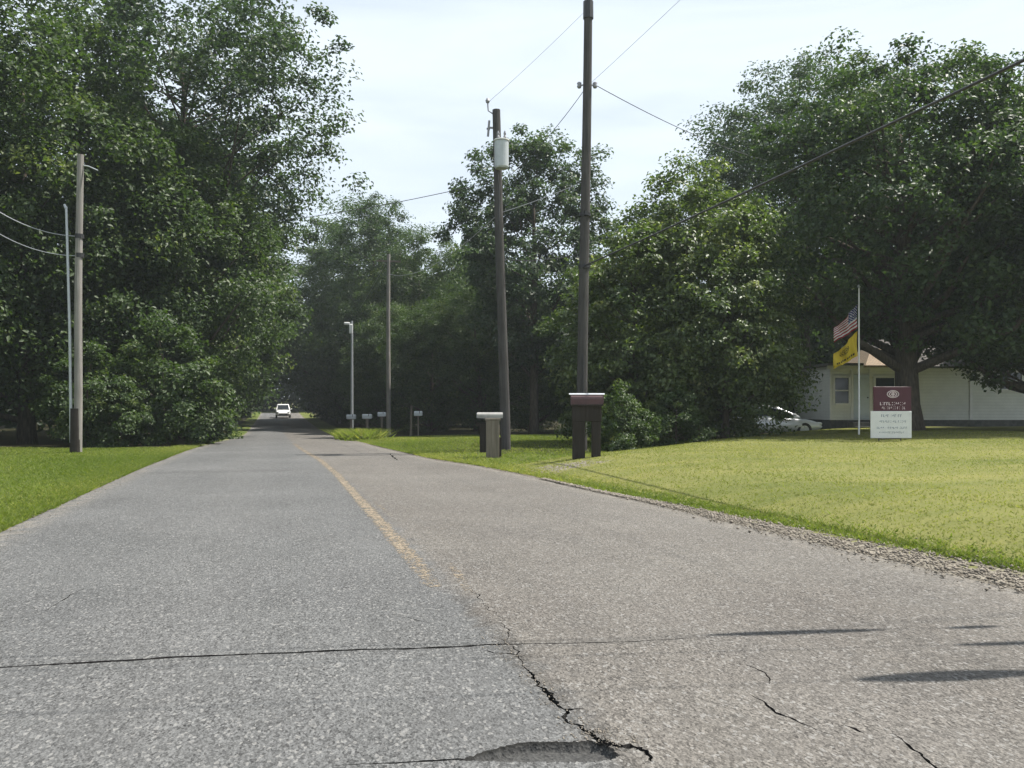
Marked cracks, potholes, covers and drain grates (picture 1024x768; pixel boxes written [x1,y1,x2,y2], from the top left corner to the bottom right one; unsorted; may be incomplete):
crack [731,662,825,733]
crack [892,733,937,768]
pothole [458,740,620,763]
crack [0,588,701,762]
